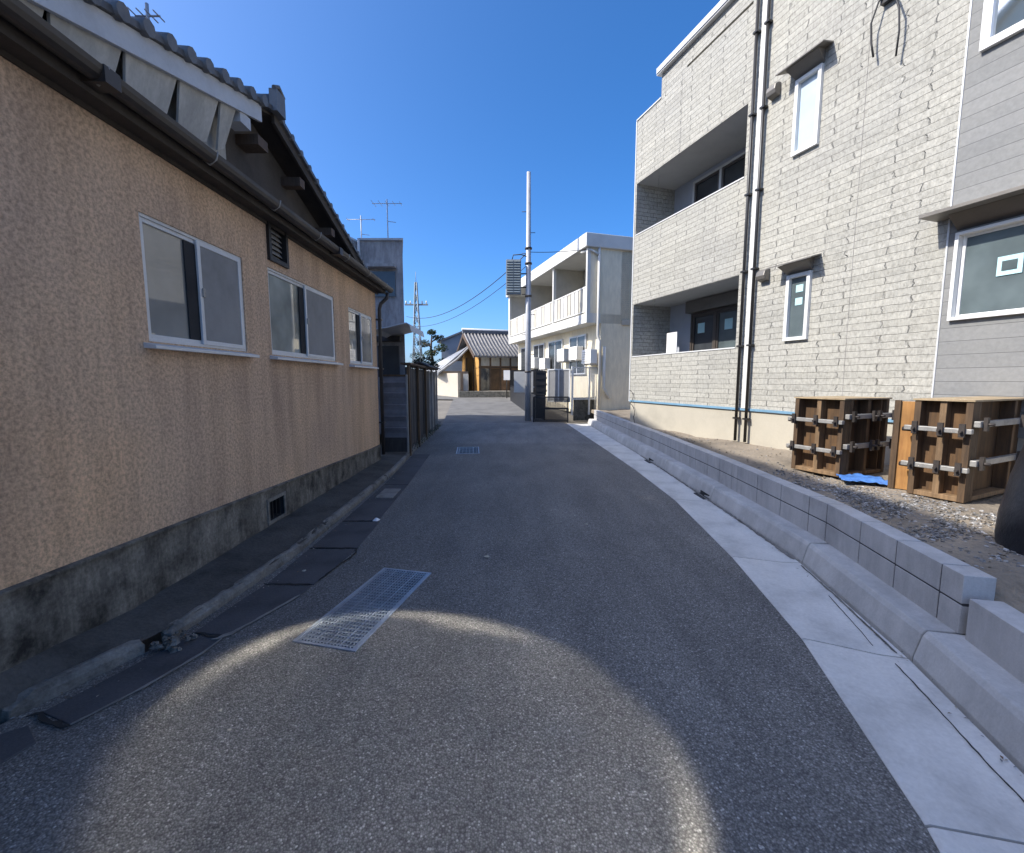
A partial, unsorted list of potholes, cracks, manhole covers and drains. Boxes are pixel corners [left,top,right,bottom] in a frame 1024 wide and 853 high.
drain grate [292,568,431,652]
